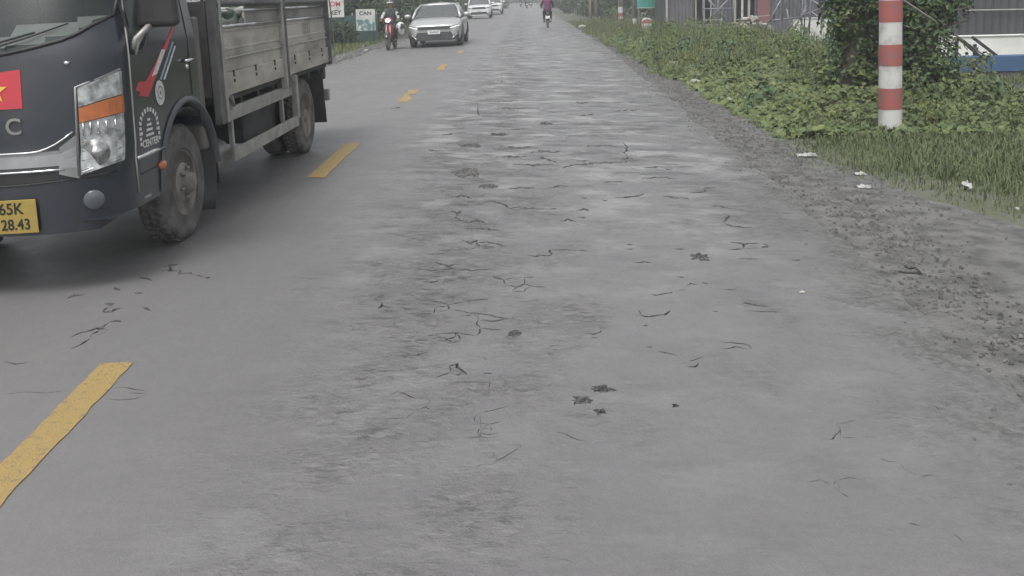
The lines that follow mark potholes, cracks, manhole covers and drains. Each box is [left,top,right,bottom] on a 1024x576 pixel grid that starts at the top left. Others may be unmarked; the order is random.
crack [70,264,211,348]
crack [414,129,769,386]
pothole [591,384,618,393]
pothole [690,253,710,261]
pothole [450,167,479,178]
pothole [572,396,593,405]
crack [110,387,147,400]
crack [464,405,521,470]
